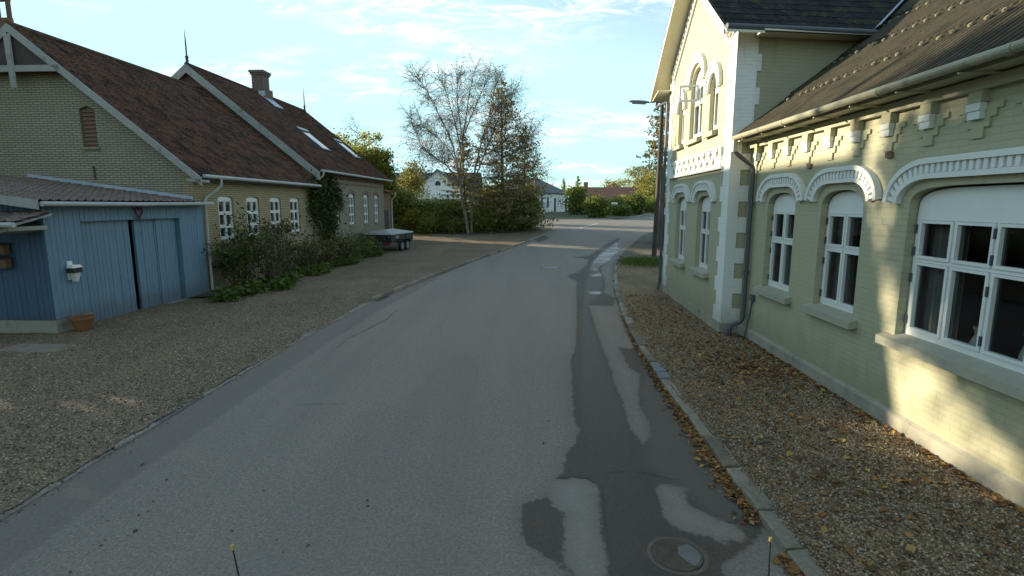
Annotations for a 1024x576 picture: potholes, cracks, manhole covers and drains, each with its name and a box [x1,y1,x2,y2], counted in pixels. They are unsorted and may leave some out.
manhole cover [647,537,710,576]
